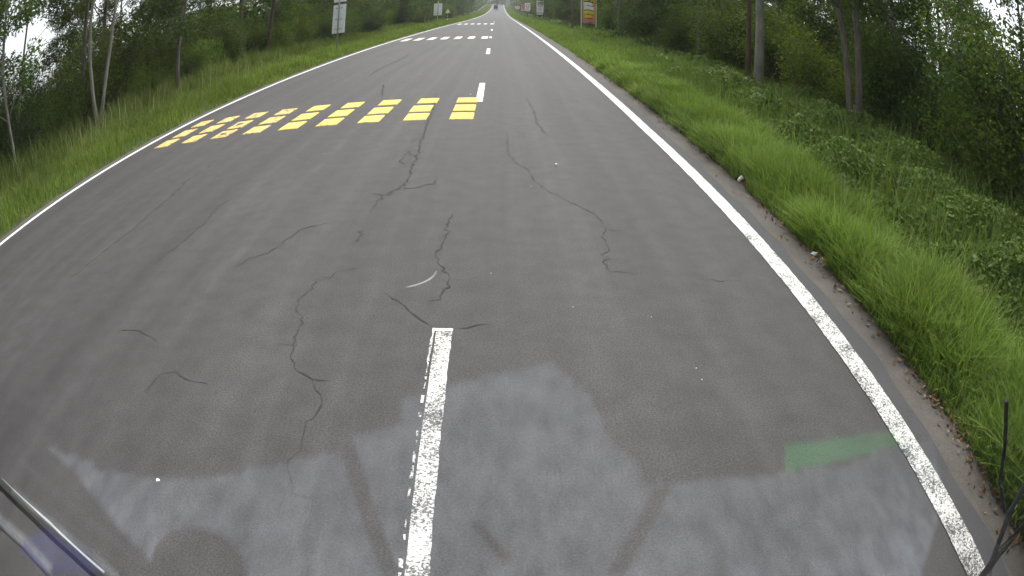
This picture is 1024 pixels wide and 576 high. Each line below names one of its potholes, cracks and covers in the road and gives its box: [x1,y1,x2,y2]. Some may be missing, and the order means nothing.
crack [371,92,438,208]
crack [231,223,328,267]
crack [276,263,365,518]
crack [387,213,468,325]
crack [506,131,639,295]
